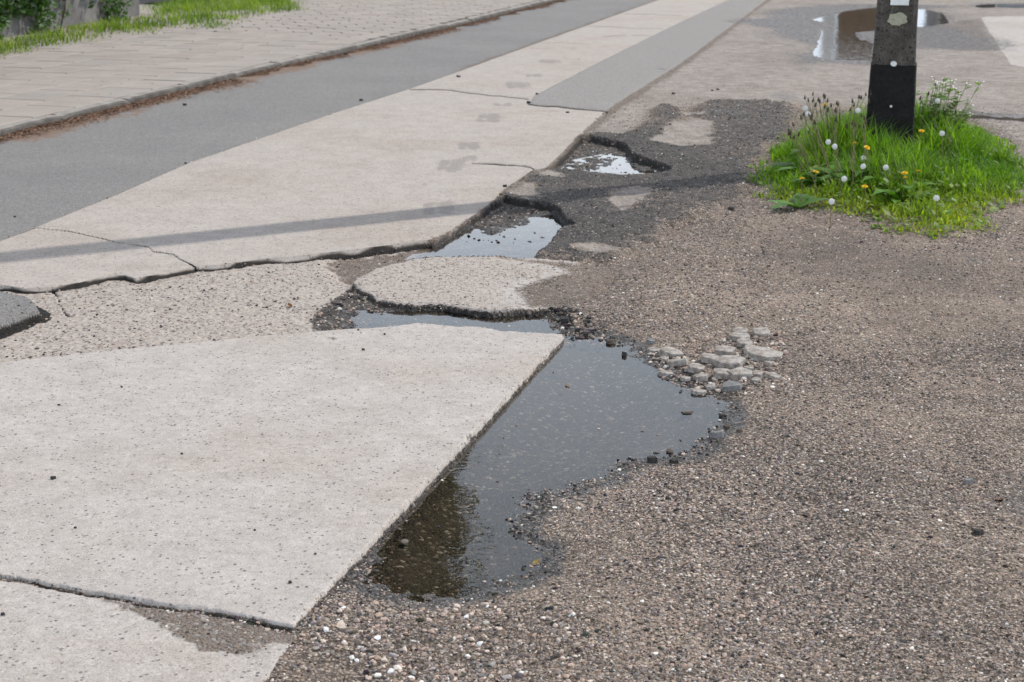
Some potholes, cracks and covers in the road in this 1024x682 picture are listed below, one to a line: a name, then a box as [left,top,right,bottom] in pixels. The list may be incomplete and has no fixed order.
pothole [797,5,959,63]
pothole [544,134,674,175]
crack [0,227,433,318]
pothole [413,194,578,260]
pothole [335,327,748,610]
